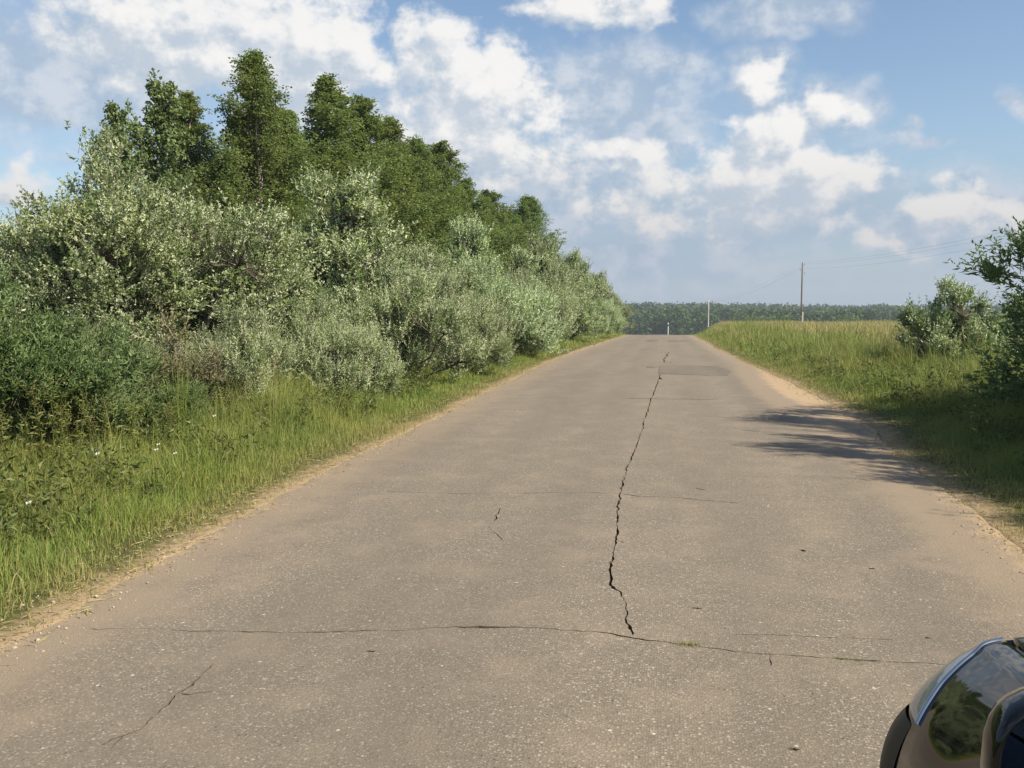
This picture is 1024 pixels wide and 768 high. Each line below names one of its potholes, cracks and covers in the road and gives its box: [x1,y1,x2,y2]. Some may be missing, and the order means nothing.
crack [103,663,214,747]
crack [95,352,944,665]
